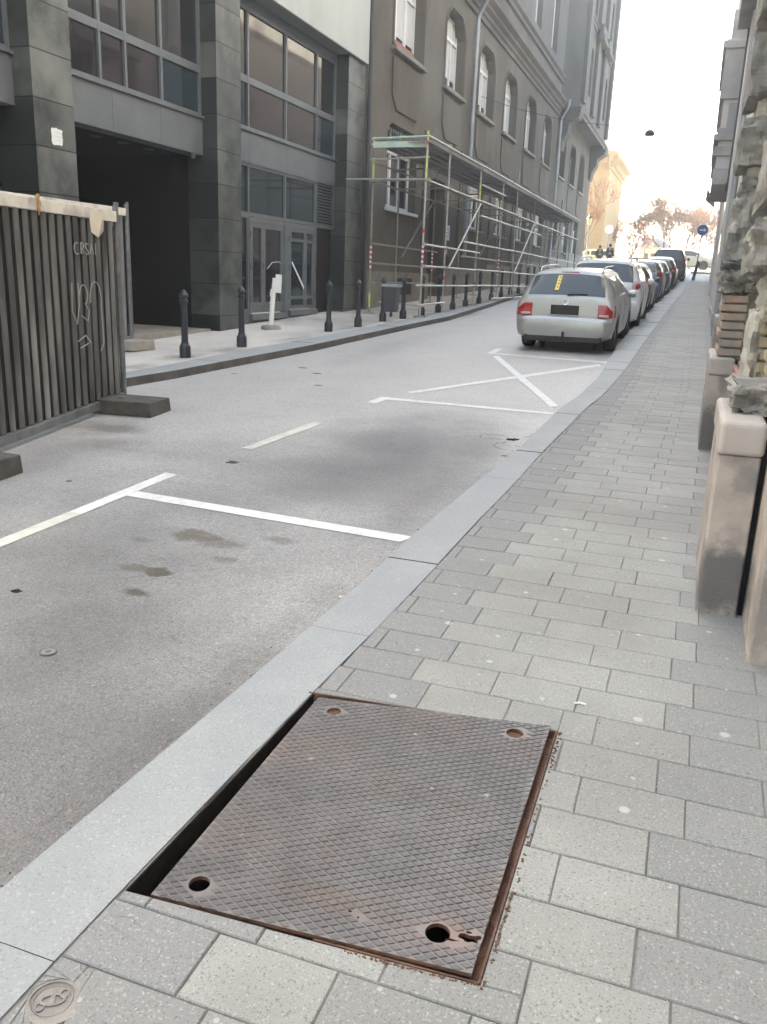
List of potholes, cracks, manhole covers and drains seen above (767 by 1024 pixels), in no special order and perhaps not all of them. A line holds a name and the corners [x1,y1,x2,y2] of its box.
manhole cover [128,692,562,990]
manhole cover [39,647,58,656]
manhole cover [25,968,94,1024]
